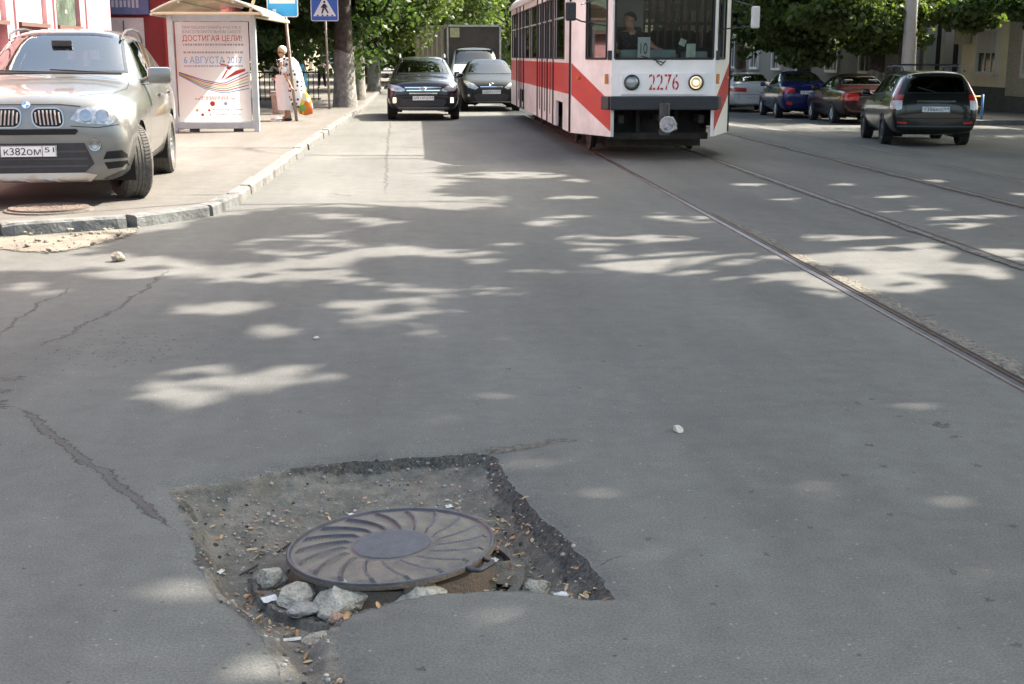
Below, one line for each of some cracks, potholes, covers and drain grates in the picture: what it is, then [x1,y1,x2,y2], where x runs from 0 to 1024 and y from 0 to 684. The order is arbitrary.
pothole [169,453,615,684]
manhole cover [8,202,89,213]
crack [477,438,578,456]
manhole cover [288,542,525,612]
manhole cover [286,507,496,595]
manhole cover [3,206,94,216]
crack [22,411,169,526]
